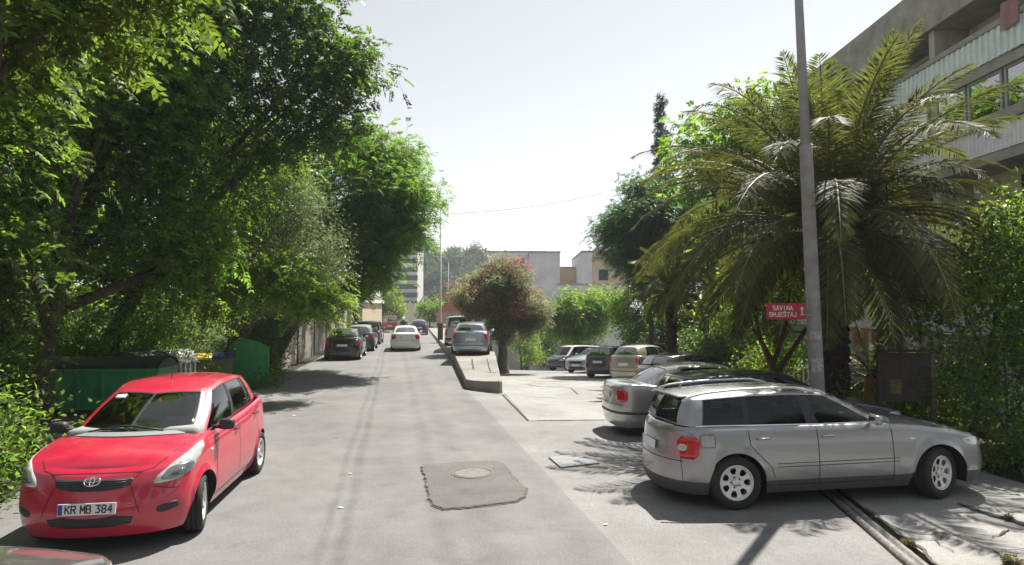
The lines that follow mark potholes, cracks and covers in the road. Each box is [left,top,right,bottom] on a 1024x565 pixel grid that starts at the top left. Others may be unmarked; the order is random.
manhole cover [549,454,600,468]
manhole cover [451,467,493,479]
